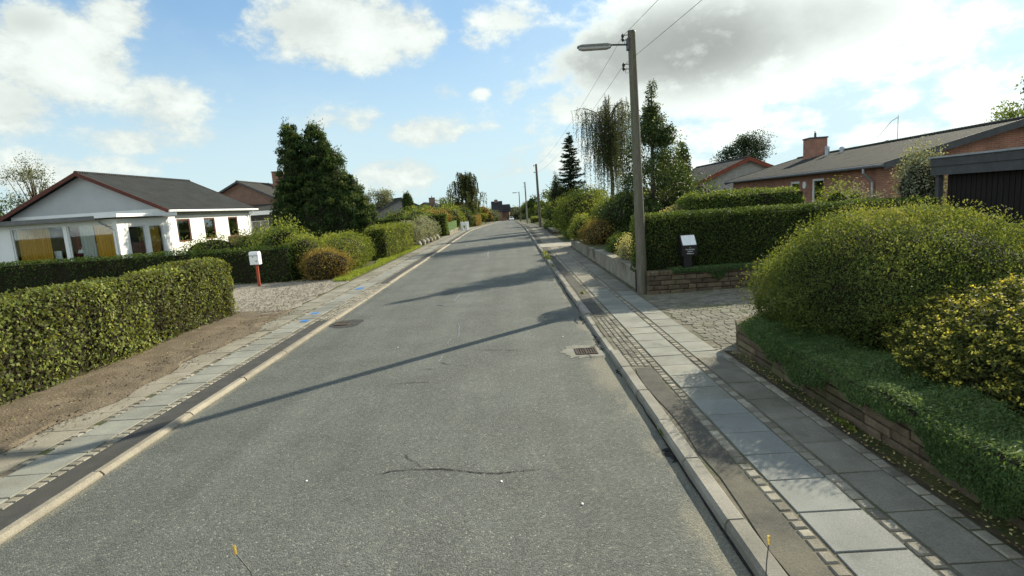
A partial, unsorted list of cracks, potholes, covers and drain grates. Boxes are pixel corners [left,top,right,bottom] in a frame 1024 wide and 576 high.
crack [376,454,546,474]
